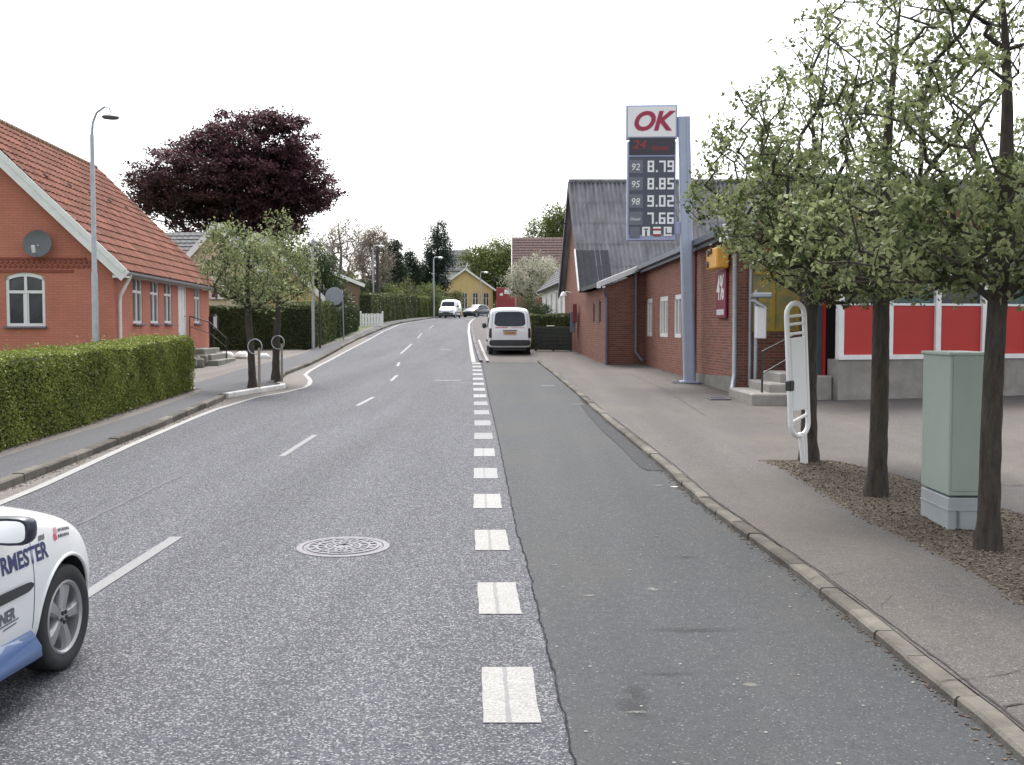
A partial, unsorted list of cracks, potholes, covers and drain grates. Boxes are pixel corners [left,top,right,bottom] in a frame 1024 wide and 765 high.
manhole cover [296,536,390,557]
